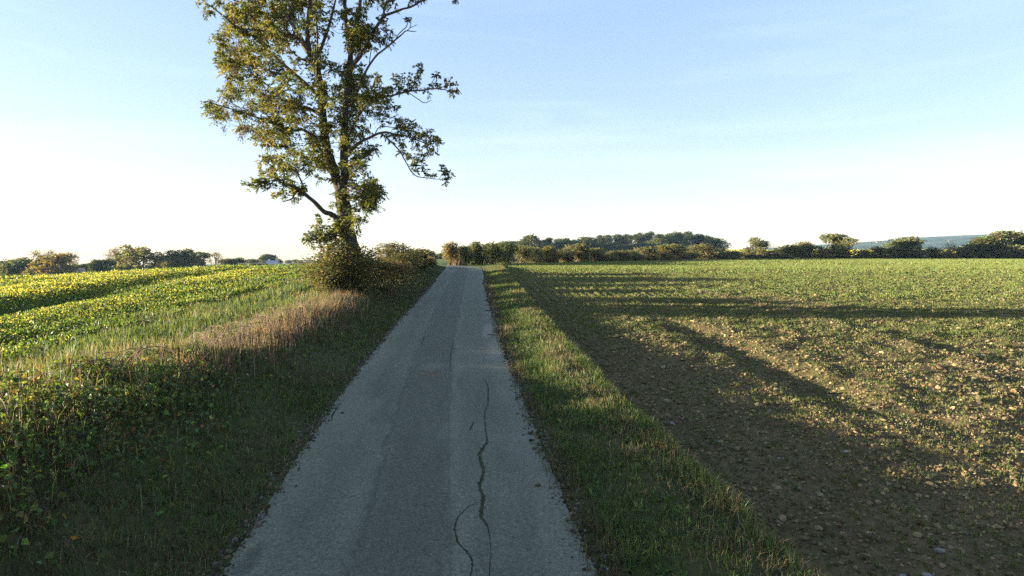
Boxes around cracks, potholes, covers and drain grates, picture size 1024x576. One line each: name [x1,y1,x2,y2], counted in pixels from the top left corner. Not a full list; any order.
crack [453,380,491,576]
